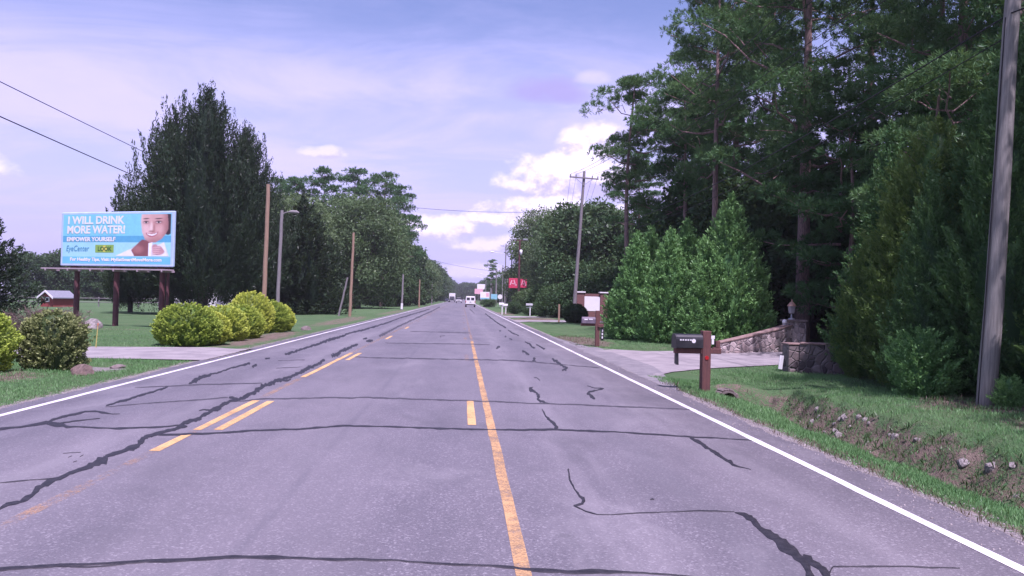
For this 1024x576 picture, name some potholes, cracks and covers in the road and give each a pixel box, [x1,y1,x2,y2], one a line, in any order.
crack [106,331,752,441]
